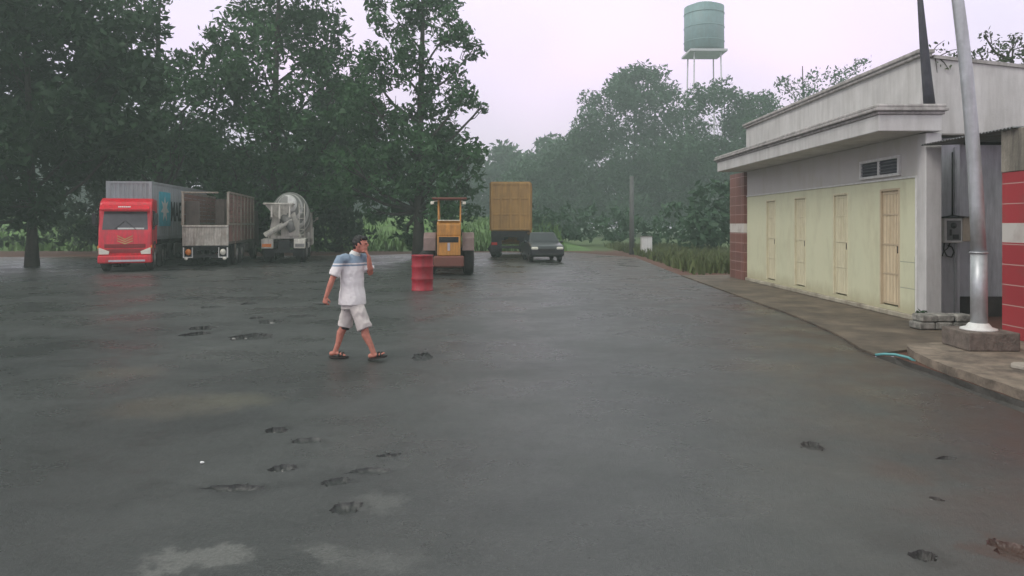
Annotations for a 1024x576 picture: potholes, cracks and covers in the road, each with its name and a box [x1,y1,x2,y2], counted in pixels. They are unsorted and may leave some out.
pothole [202,483,265,492]
pothole [346,467,391,475]
pothole [411,352,433,361]
pothole [907,549,938,562]
pothole [800,441,825,451]
pothole [329,501,363,516]
pothole [267,464,298,472]
pothole [321,477,351,487]
pothole [986,537,1024,562]
